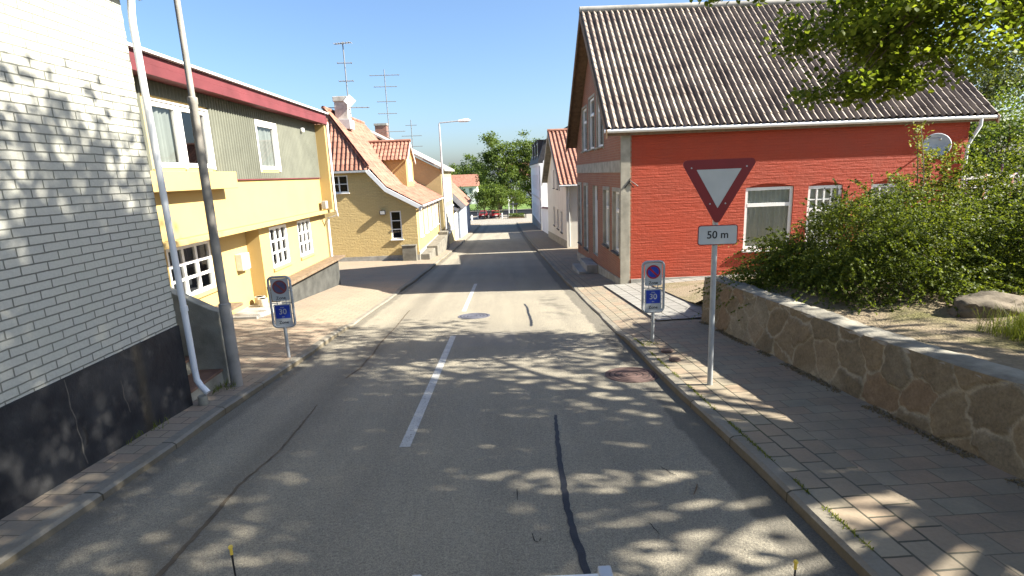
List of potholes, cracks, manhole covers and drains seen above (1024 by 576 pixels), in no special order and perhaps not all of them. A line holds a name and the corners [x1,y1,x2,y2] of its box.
crack [155,405,317,576]
crack [346,310,410,378]
manhole cover [605,367,659,383]
